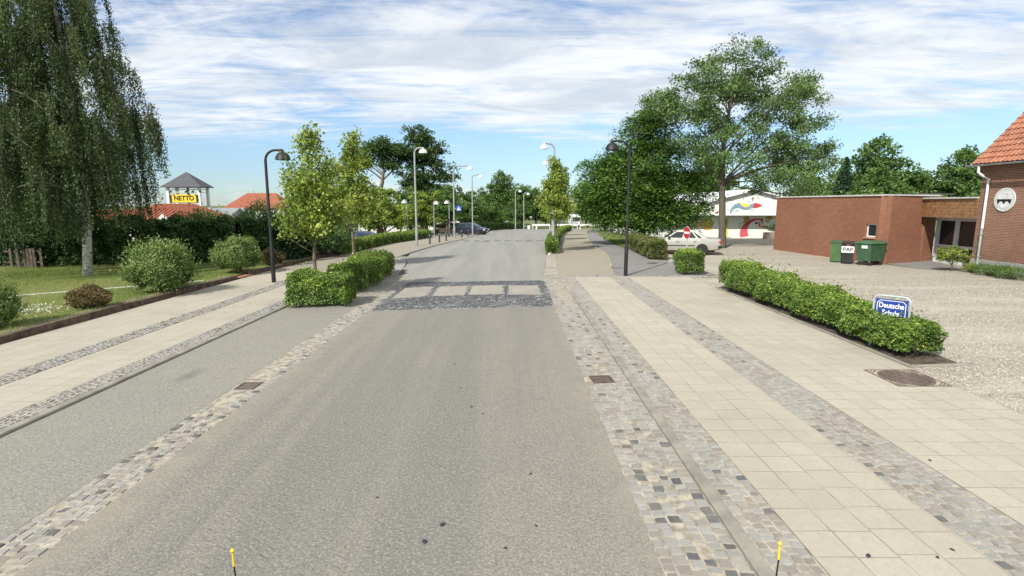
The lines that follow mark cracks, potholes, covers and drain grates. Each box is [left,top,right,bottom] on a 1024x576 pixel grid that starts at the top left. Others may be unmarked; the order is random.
drain grate [589,375,615,383]
manhole cover [865,370,953,387]
drain grate [233,382,264,390]
